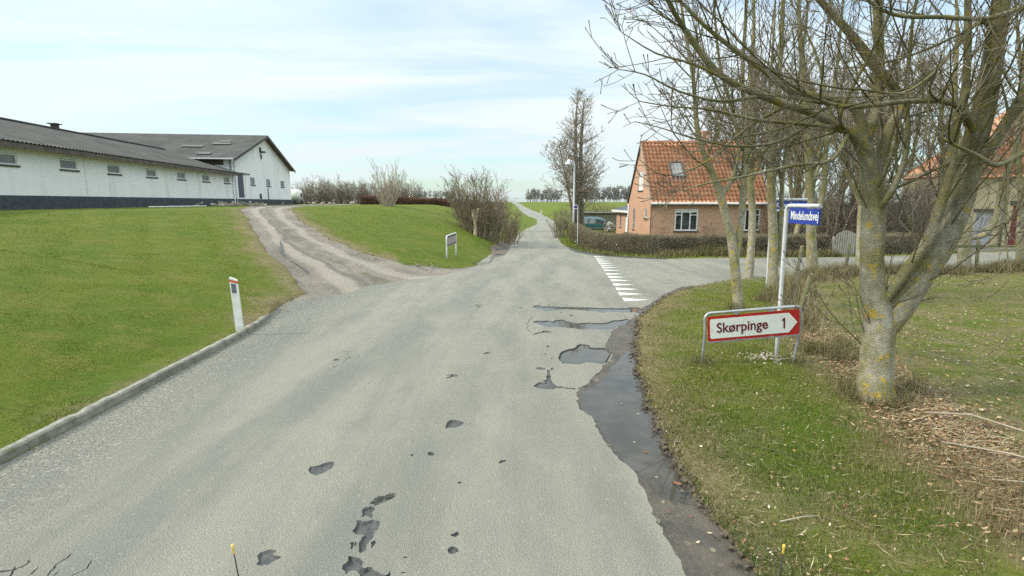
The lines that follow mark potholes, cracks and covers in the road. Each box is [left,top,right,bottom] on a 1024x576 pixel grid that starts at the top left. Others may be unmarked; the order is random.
pothole [352,520,380,553]
pothole [342,556,390,576]
pothole [361,506,375,518]
crack [0,554,92,576]
pothole [308,462,334,476]
pothole [534,370,575,390]
pothole [446,420,464,428]
pothole [370,493,396,506]
pothole [256,549,281,566]
pothole [534,319,630,329]
pothole [558,344,612,363]
